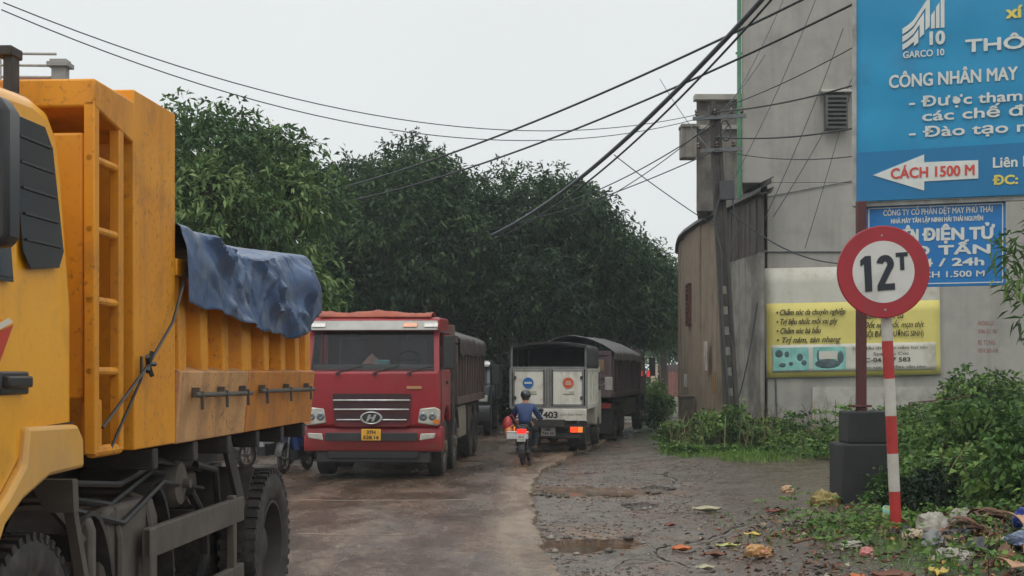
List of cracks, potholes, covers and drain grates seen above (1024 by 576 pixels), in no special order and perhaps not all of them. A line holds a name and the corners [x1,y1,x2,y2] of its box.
pothole [543,538,650,556]
pothole [533,486,688,499]
pothole [626,501,659,511]
crack [661,472,680,485]
crack [614,524,752,569]
